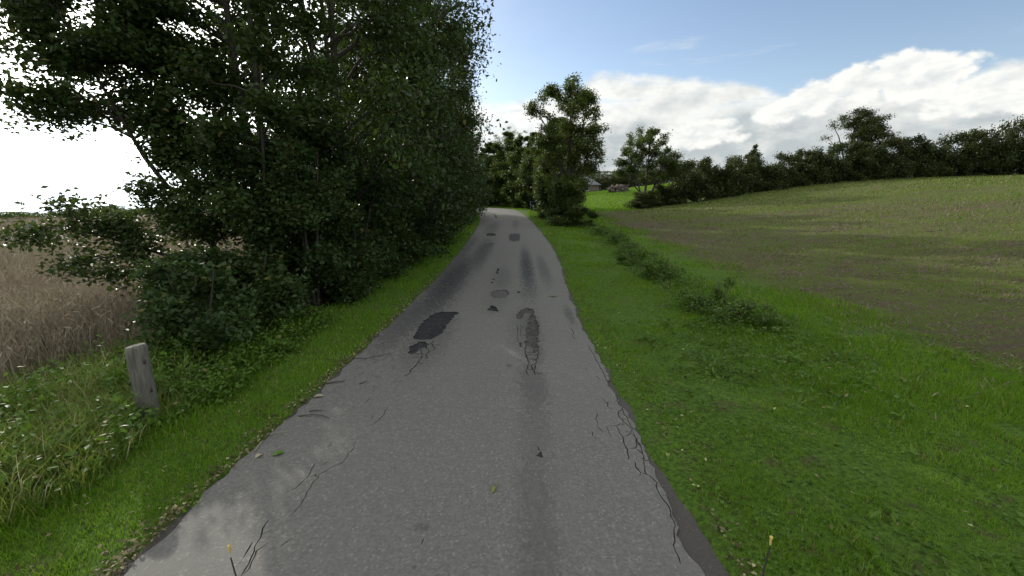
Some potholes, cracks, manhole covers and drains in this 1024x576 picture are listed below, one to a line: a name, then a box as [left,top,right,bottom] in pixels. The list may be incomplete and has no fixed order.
crack [241,443,355,576]
pothole [491,290,509,298]
pothole [516,308,535,319]
pothole [408,342,428,354]
crack [571,329,681,564]
pothole [413,312,459,340]
crack [405,341,440,376]
pothole [524,315,540,349]
